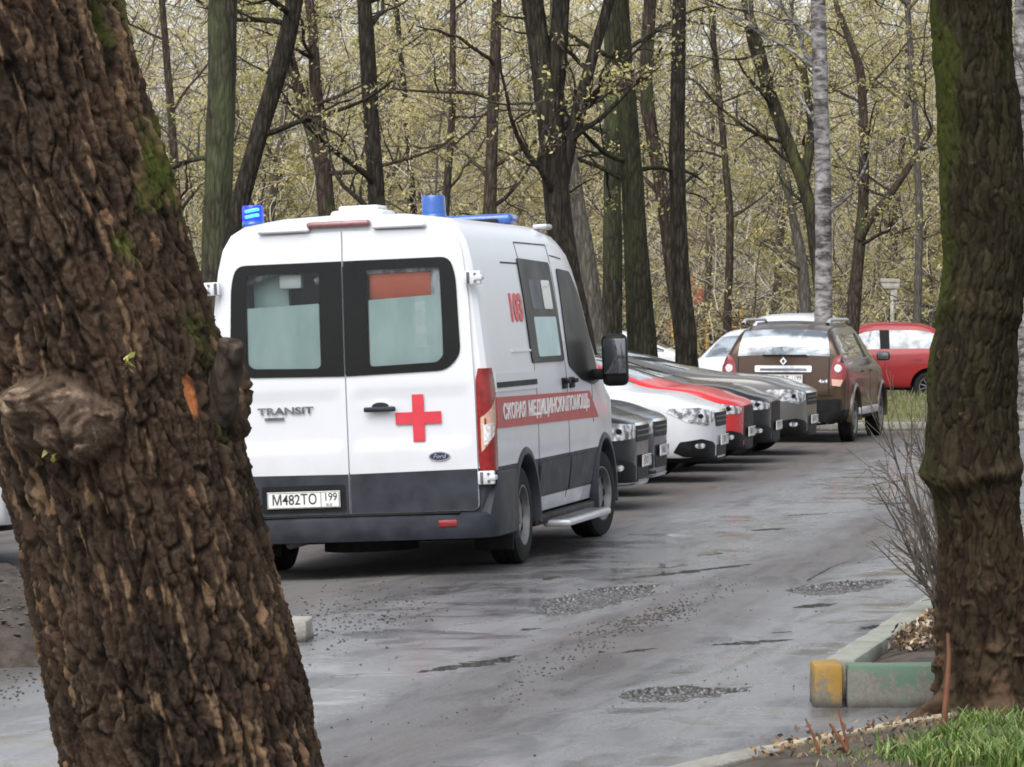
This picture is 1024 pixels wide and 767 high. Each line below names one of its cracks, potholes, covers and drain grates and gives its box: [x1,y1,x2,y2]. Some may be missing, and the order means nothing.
crack [626,564,751,578]
pothole [534,584,661,617]
pothole [618,685,753,703]
crack [713,631,795,646]
crack [806,562,846,581]
crack [418,655,522,673]
crack [752,513,828,531]
pothole [785,579,897,596]
